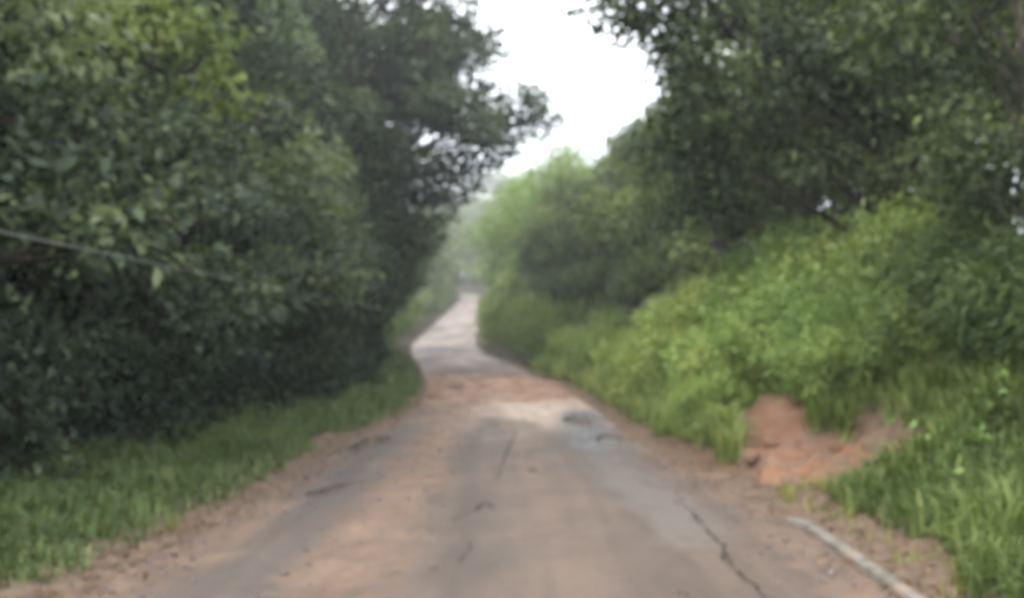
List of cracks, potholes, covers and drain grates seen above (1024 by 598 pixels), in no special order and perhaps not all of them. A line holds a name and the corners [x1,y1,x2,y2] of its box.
pothole [560,414,594,427]
pothole [475,502,495,510]
crack [494,434,516,479]
crack [674,500,767,598]
pothole [594,434,633,446]
